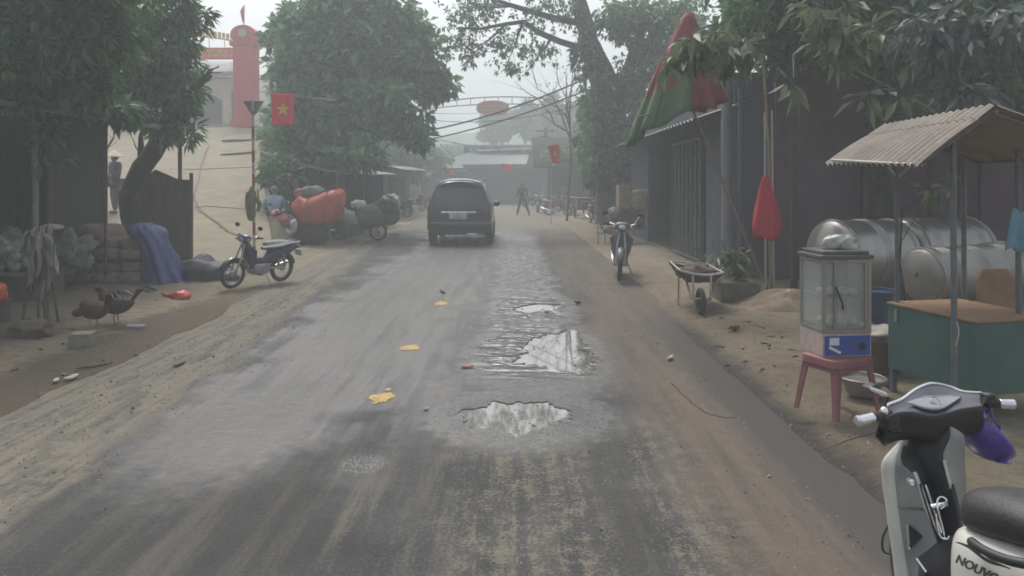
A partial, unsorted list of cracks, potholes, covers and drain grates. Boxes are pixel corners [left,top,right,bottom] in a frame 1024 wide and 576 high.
pothole [512,303,561,313]
pothole [456,400,574,437]
pothole [512,329,596,375]
